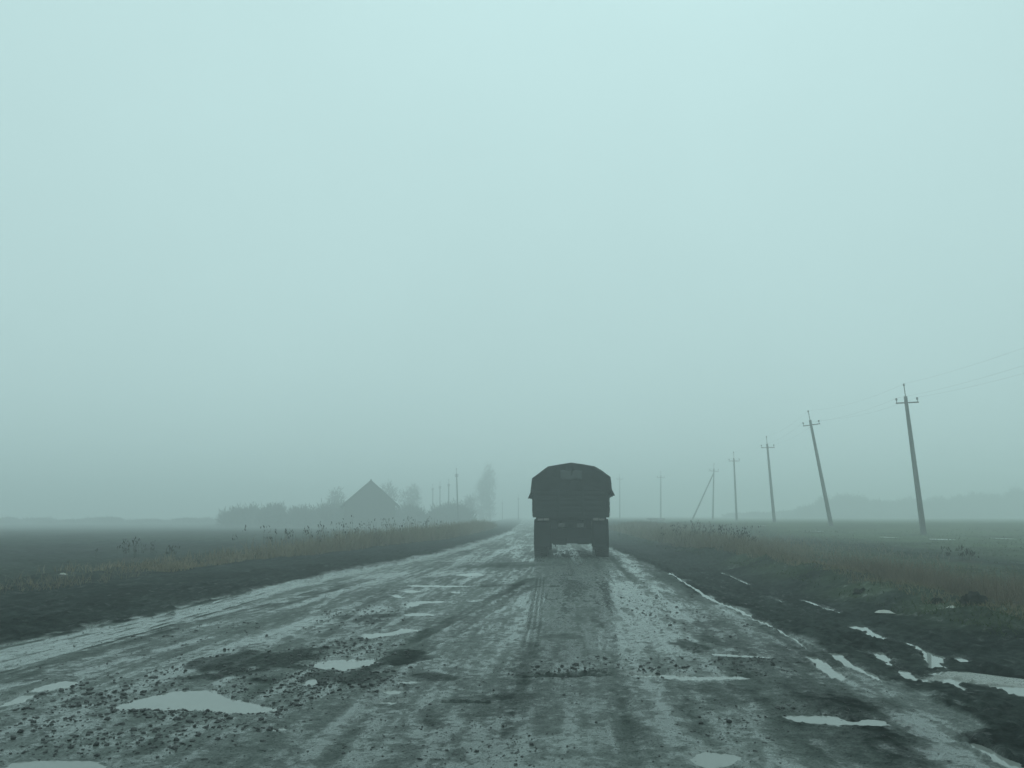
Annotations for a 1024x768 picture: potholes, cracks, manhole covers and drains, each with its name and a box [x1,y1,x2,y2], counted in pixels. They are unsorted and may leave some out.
pothole [302,656,386,672]
pothole [764,710,907,729]
pothole [97,686,295,716]
pothole [0,753,126,768]
pothole [681,746,758,768]
pothole [16,677,87,698]
